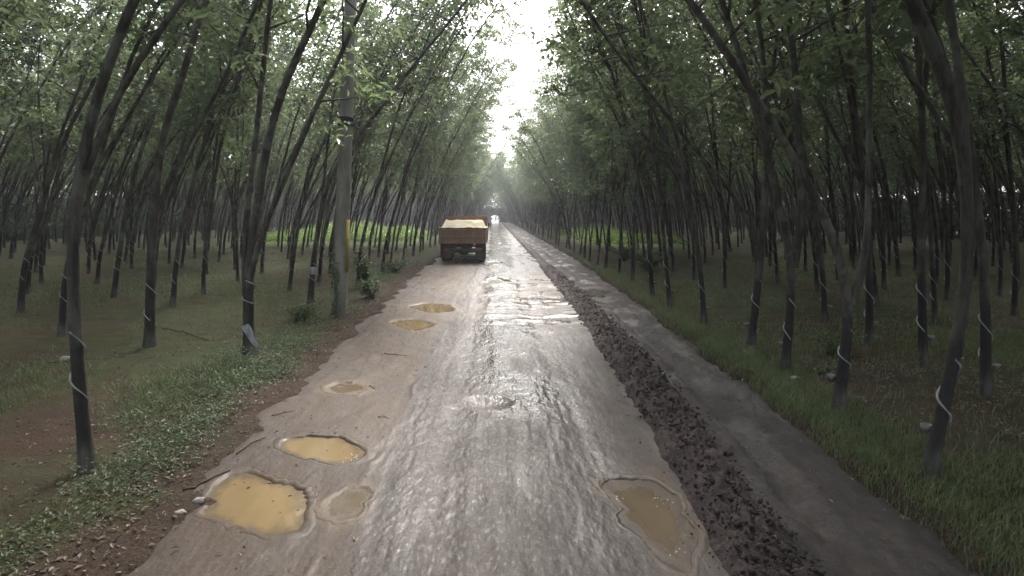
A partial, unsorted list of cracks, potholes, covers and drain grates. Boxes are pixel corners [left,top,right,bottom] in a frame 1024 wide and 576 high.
pothole [404,302,460,314]
pothole [320,380,370,396]
pothole [442,393,522,413]
pothole [386,318,441,332]
pothole [273,433,375,466]
pothole [313,483,378,525]
pothole [192,467,318,541]
pothole [595,472,709,576]
